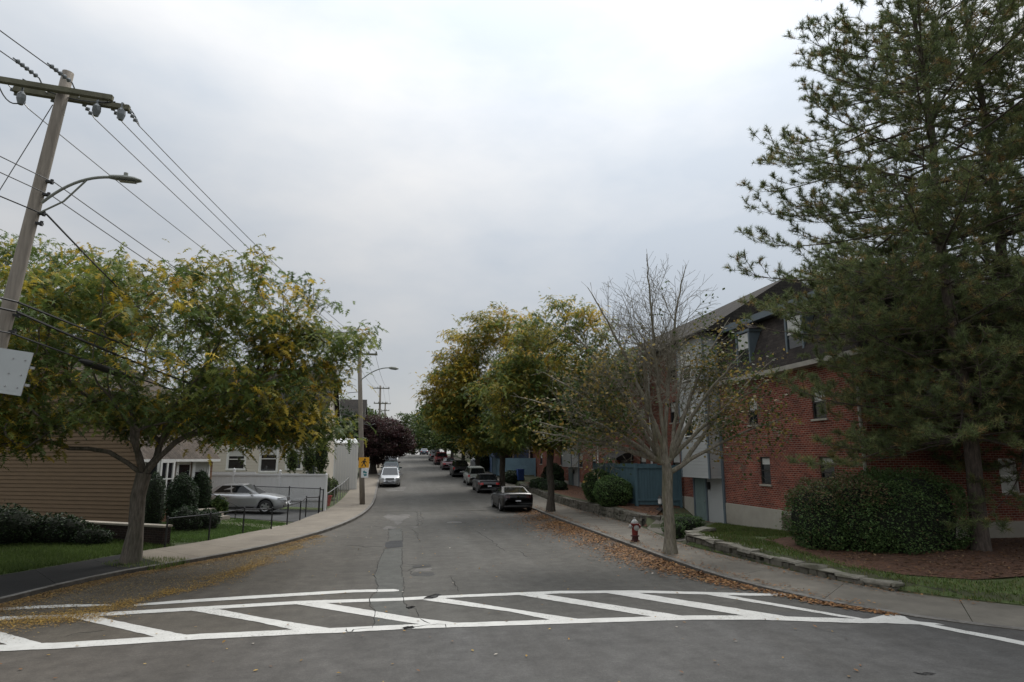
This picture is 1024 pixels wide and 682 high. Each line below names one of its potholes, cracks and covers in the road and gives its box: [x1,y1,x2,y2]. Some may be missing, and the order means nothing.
crack [346,512,446,632]
